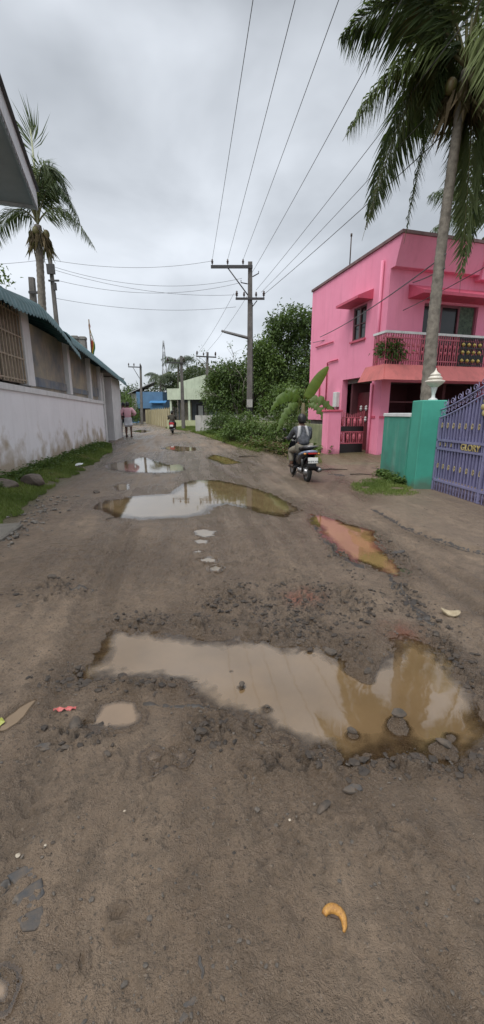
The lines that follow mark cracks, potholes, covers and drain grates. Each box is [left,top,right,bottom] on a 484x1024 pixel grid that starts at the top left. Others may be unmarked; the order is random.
pothole [104,457,185,473]
pothole [76,629,484,767]
pothole [93,480,302,520]
pothole [308,513,412,578]
pothole [208,454,242,465]
